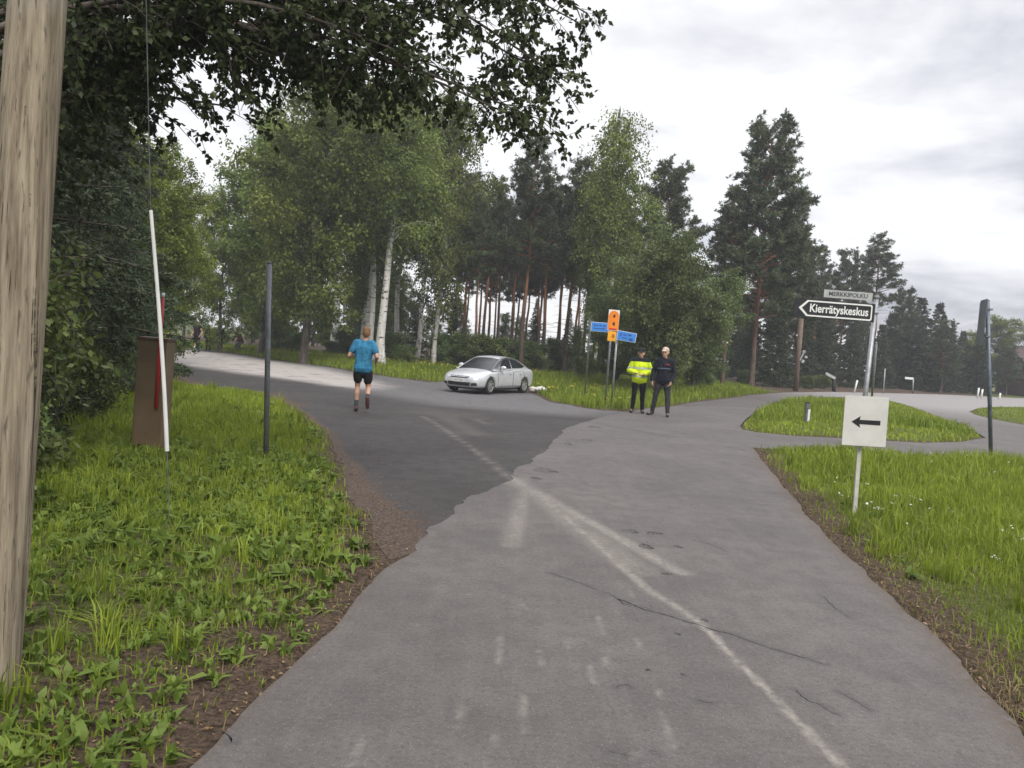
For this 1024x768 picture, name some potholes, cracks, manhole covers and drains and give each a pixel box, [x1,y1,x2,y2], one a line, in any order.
crack [555,574,816,662]
